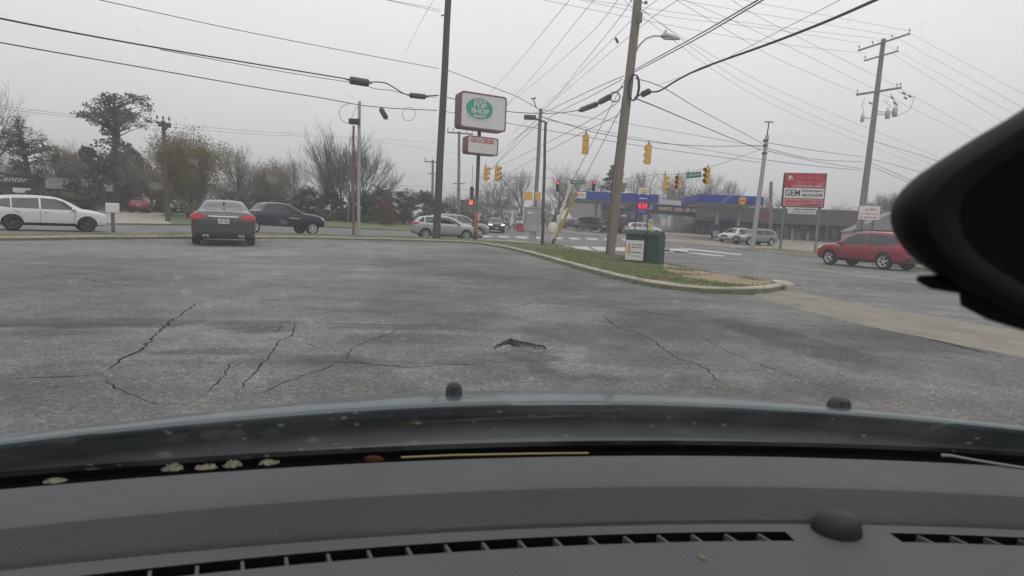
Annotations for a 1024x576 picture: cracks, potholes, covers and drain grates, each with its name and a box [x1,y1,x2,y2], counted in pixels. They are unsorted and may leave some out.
crack [507,296,858,399]
crack [207,322,494,400]
pothole [493,338,560,360]
crack [0,297,273,405]
